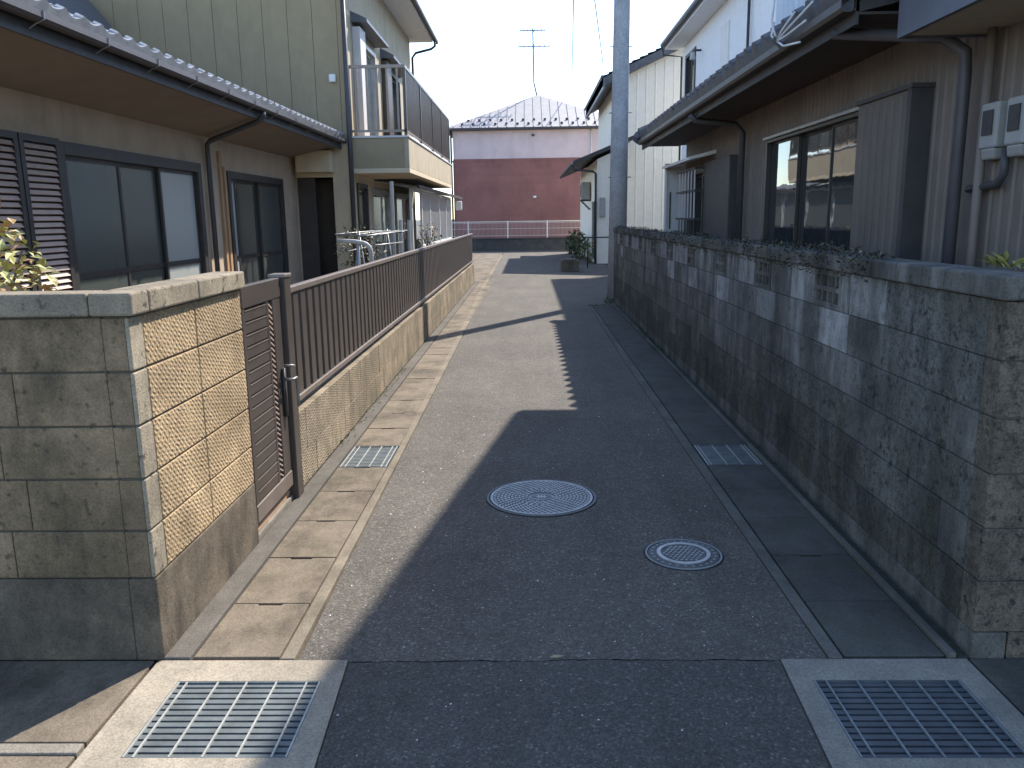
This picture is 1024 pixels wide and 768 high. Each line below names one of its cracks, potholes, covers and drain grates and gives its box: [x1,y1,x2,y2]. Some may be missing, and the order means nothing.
manhole cover [643,539,724,571]
drain grate [339,446,398,468]
drain grate [121,681,321,758]
drain grate [693,444,763,466]
drain grate [813,680,1024,758]
manhole cover [486,479,597,517]
